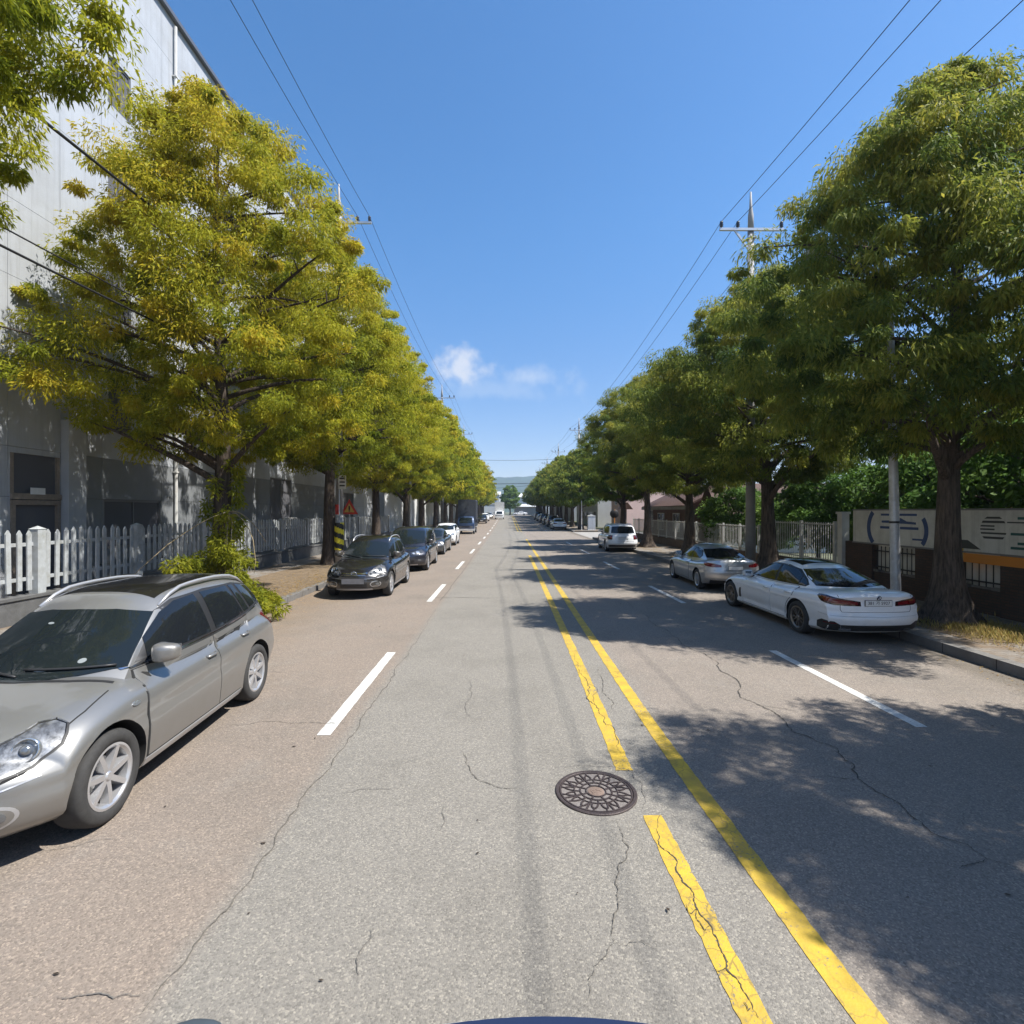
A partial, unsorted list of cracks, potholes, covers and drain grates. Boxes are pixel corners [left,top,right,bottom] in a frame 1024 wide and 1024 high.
crack [555,765,758,1016]
crack [631,605,1002,867]
manhole cover [555,770,638,816]
crack [574,654,627,753]
